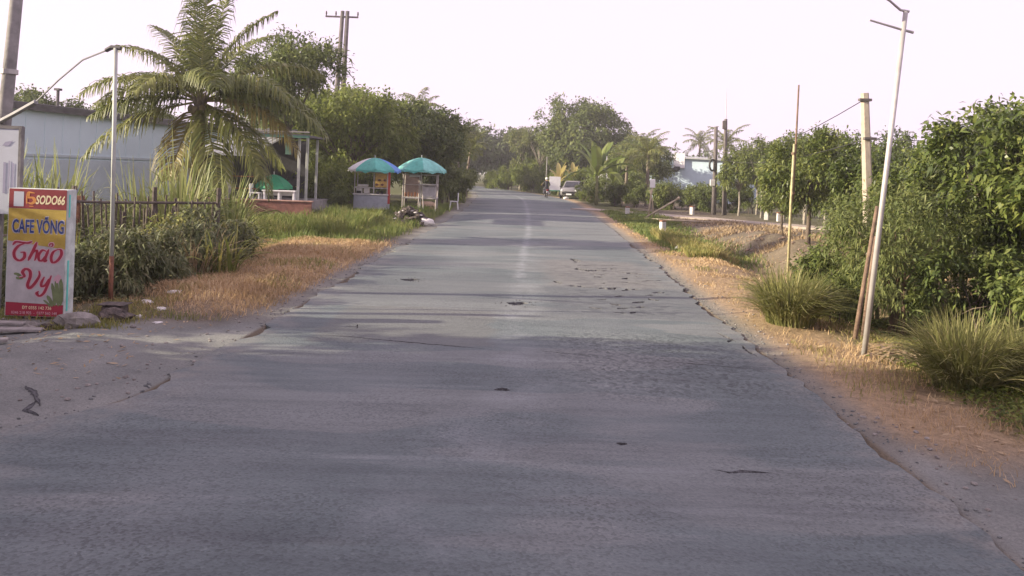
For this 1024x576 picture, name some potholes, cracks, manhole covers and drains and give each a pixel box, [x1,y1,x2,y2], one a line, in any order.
crack [22,386,40,416]
